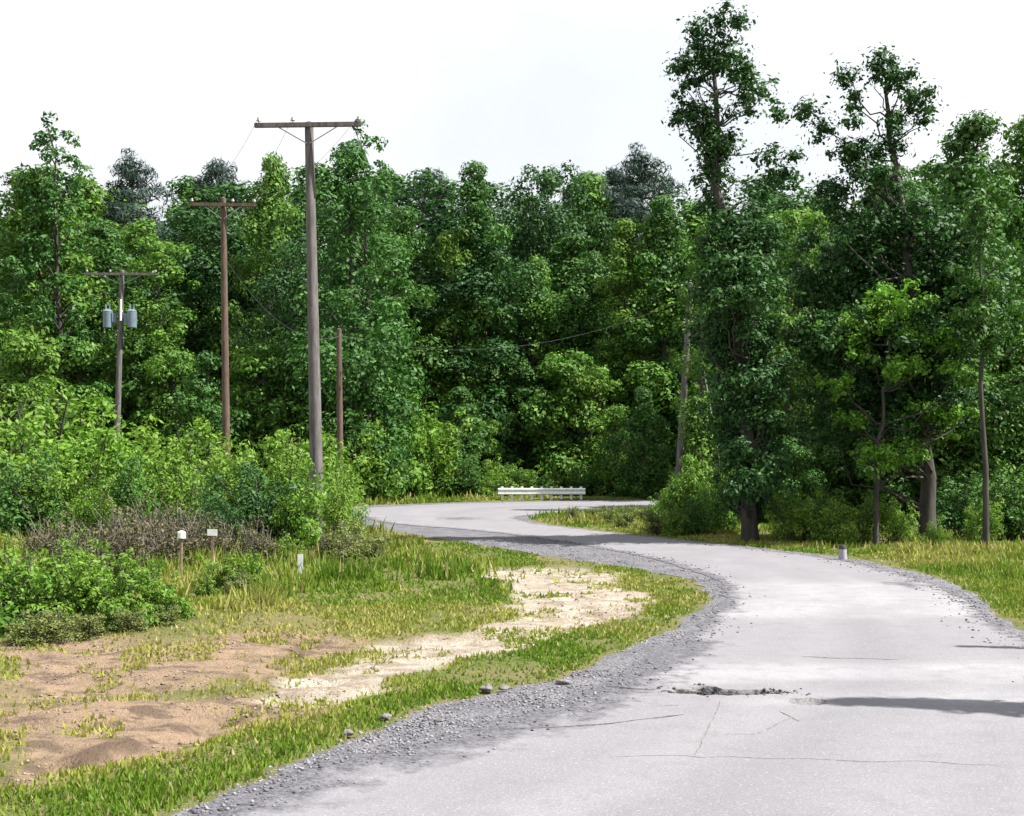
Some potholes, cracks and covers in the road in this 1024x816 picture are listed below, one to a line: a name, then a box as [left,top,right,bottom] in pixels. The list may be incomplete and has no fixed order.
crack [474,686,975,765]
pothole [655,686,785,696]
